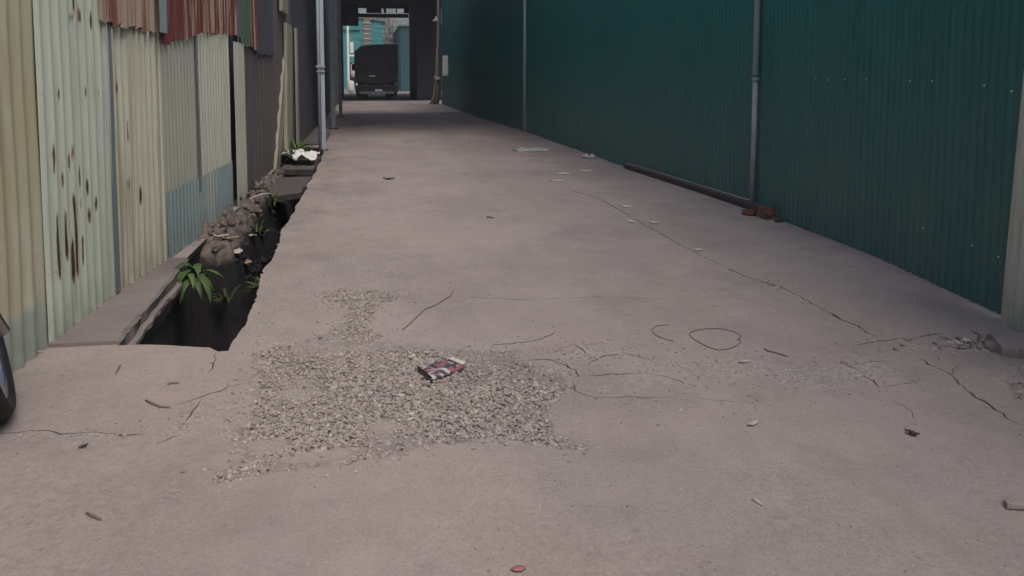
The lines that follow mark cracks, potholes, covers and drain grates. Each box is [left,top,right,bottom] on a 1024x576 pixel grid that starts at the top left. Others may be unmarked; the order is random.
crack [161,351,246,442]
crack [570,190,1023,426]
crack [487,331,743,402]
pothole [202,289,591,485]
